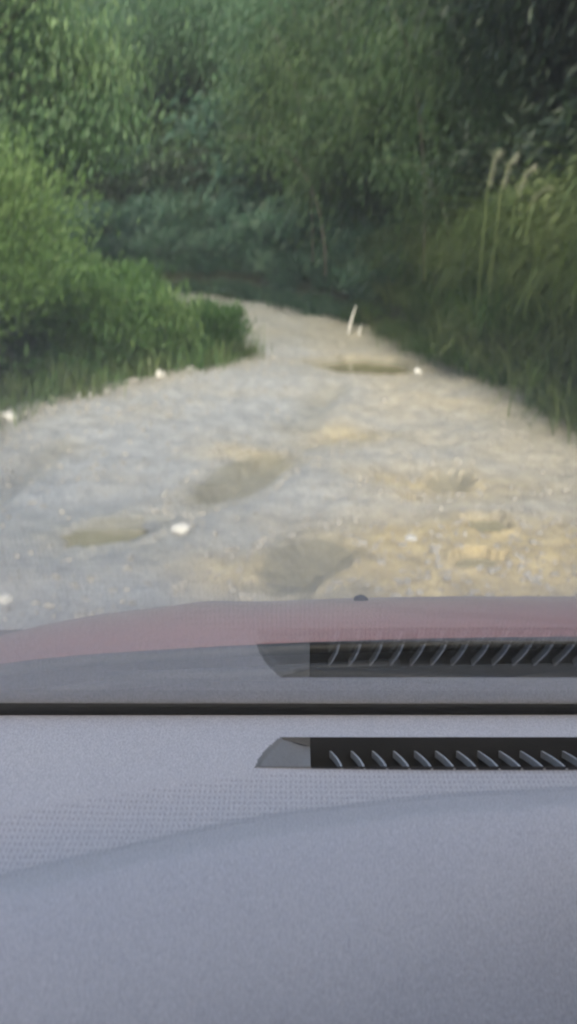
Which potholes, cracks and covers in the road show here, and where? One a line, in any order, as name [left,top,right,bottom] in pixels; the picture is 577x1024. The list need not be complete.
pothole [142,451,313,530]
pothole [408,460,490,498]
pothole [287,353,448,378]
pothole [230,527,380,601]
pothole [24,510,206,561]
